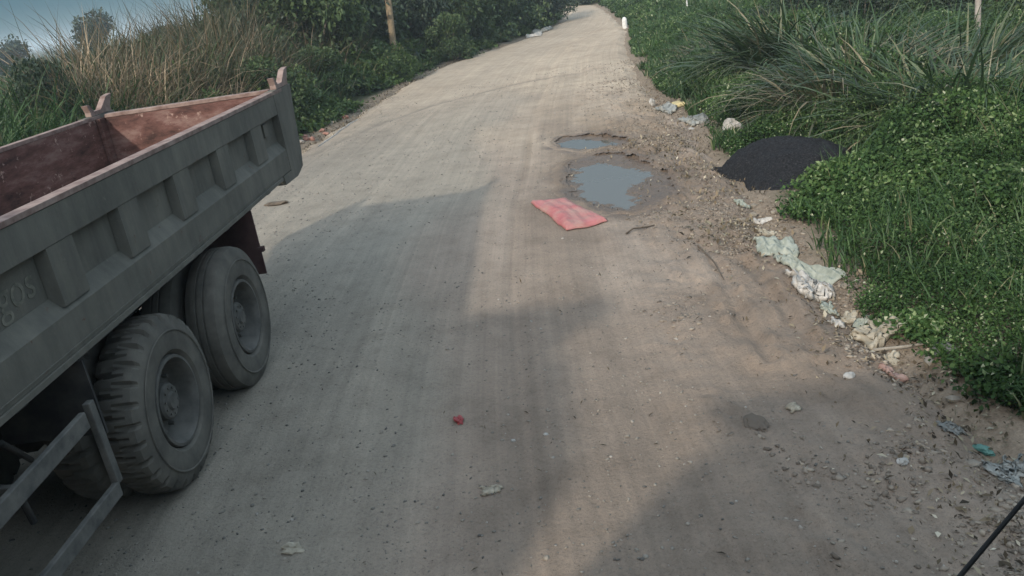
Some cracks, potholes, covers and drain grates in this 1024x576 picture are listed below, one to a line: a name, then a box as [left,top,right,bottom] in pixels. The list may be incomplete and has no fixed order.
pothole [542,130,642,153]
pothole [549,146,691,216]
